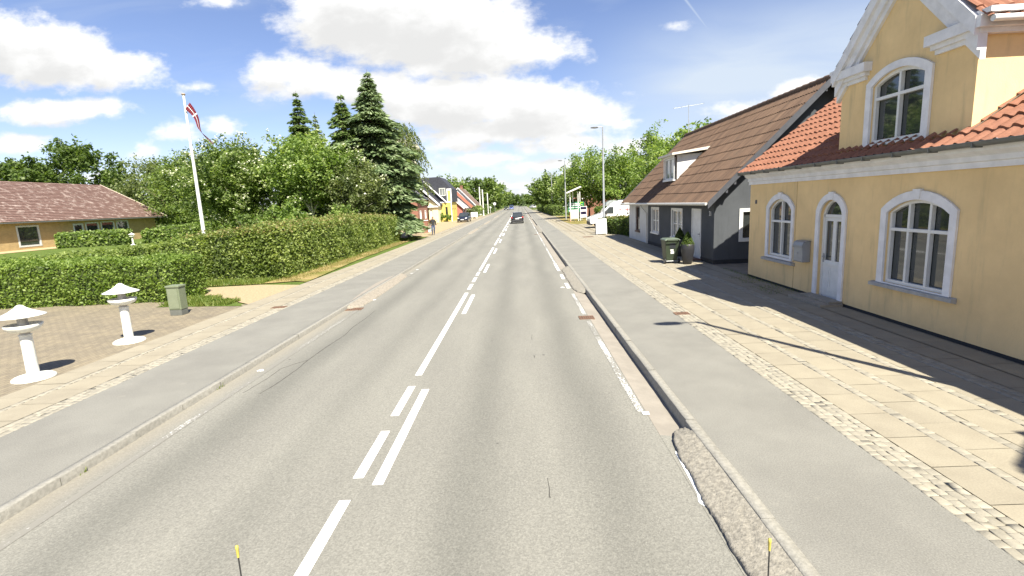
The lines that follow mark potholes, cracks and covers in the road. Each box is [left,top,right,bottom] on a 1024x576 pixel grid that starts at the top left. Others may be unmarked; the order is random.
crack [245,314,371,393]
